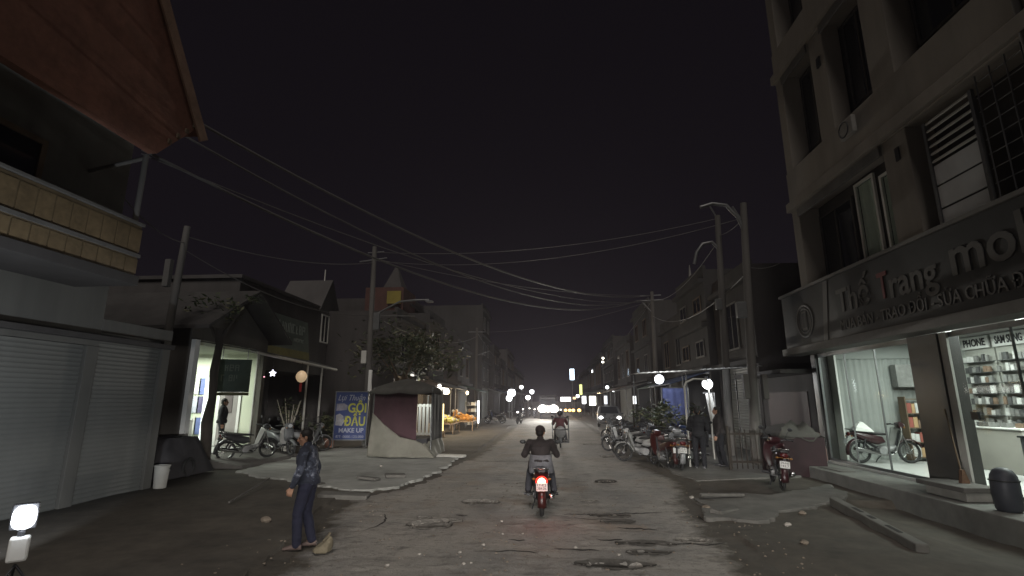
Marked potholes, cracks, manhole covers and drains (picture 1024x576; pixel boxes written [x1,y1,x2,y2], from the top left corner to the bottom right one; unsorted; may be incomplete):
pothole [406,519,453,530]
pothole [573,559,657,570]
crack [496,539,536,553]
